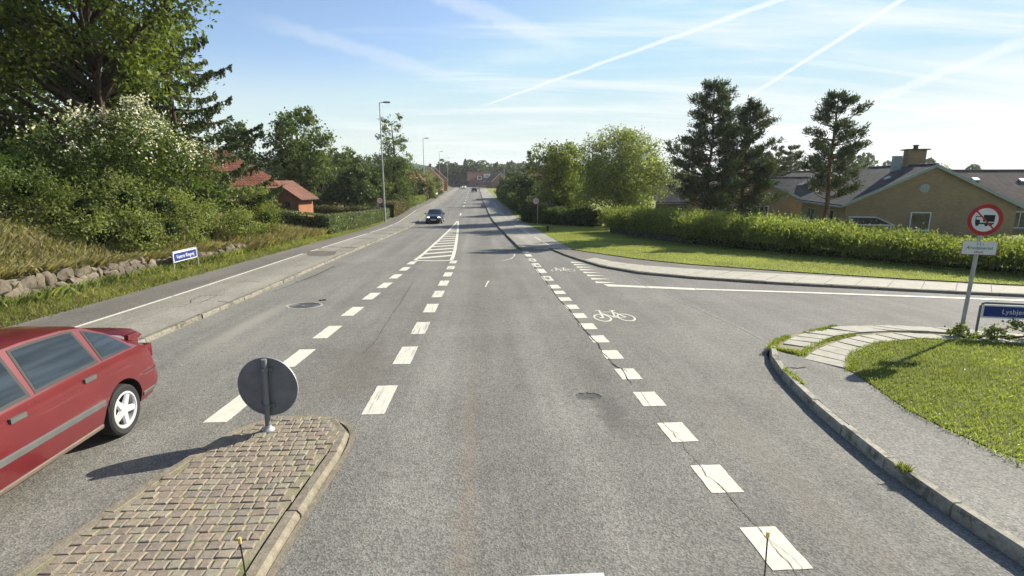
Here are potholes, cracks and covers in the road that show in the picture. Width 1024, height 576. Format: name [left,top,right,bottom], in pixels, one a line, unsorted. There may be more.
pothole [576,392,602,400]
